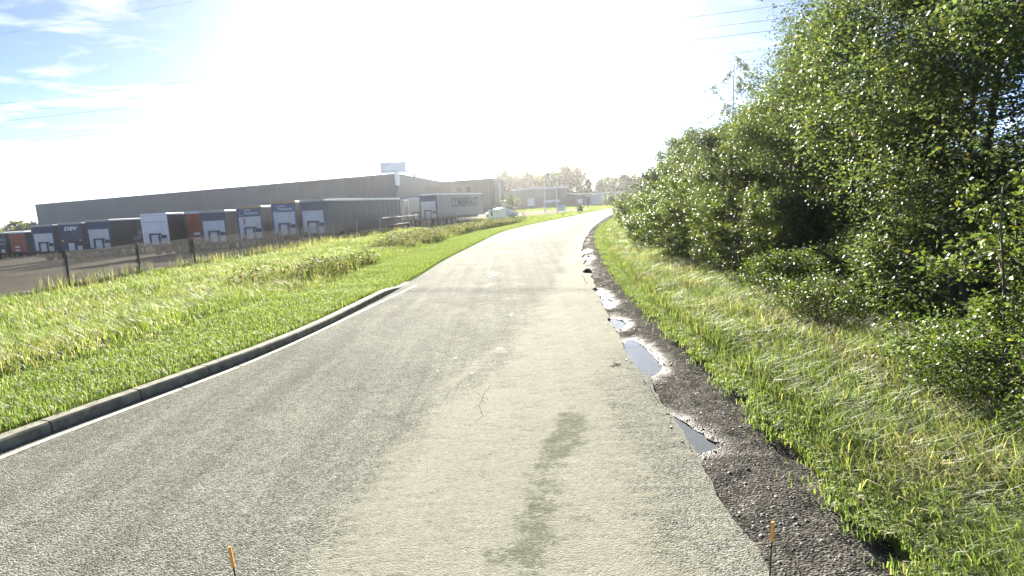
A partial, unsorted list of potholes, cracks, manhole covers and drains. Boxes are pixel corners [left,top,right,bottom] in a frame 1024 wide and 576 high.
pothole [603,318,631,330]
pothole [665,409,719,456]
pothole [623,338,667,378]
